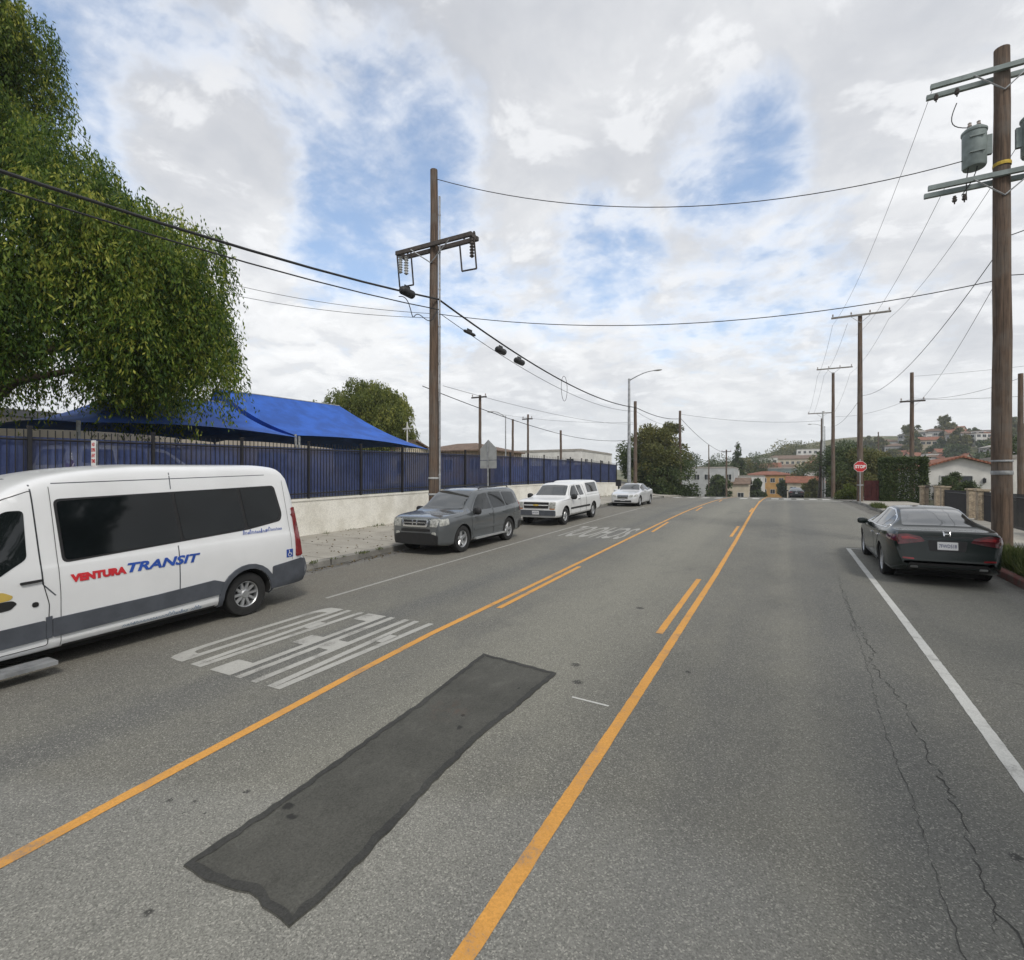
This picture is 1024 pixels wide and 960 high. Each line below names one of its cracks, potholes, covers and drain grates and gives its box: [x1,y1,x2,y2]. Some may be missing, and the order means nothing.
crack [838,578,1024,960]
